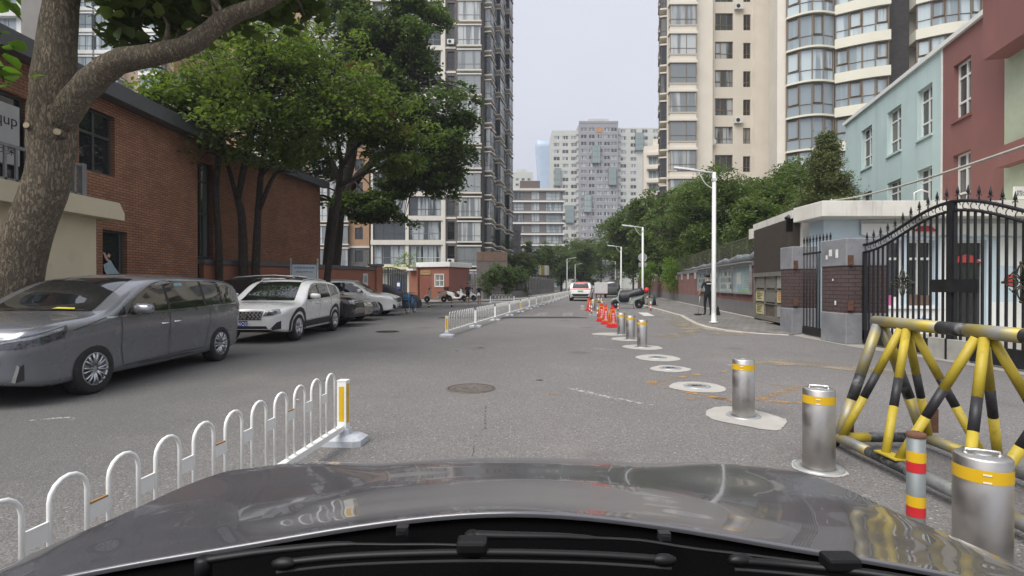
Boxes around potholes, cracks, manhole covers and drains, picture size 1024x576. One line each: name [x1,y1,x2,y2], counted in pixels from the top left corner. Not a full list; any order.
manhole cover [446,383,496,394]
